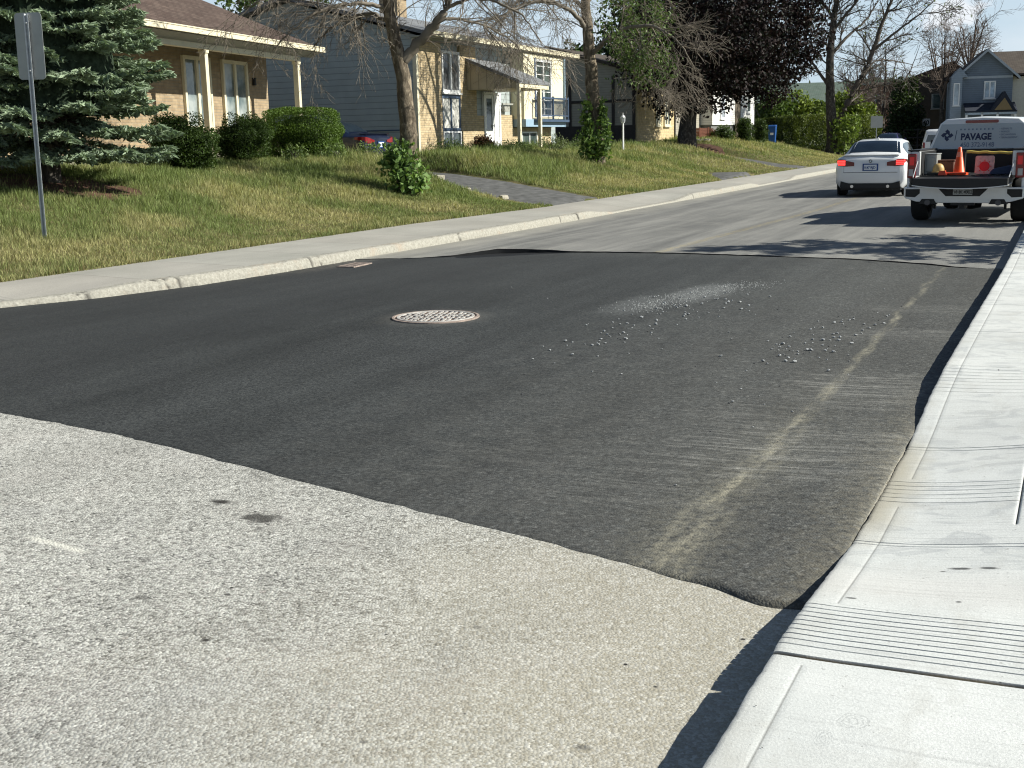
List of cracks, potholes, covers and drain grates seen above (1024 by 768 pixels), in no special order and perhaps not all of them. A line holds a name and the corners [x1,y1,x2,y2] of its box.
manhole cover [392,310,480,324]
